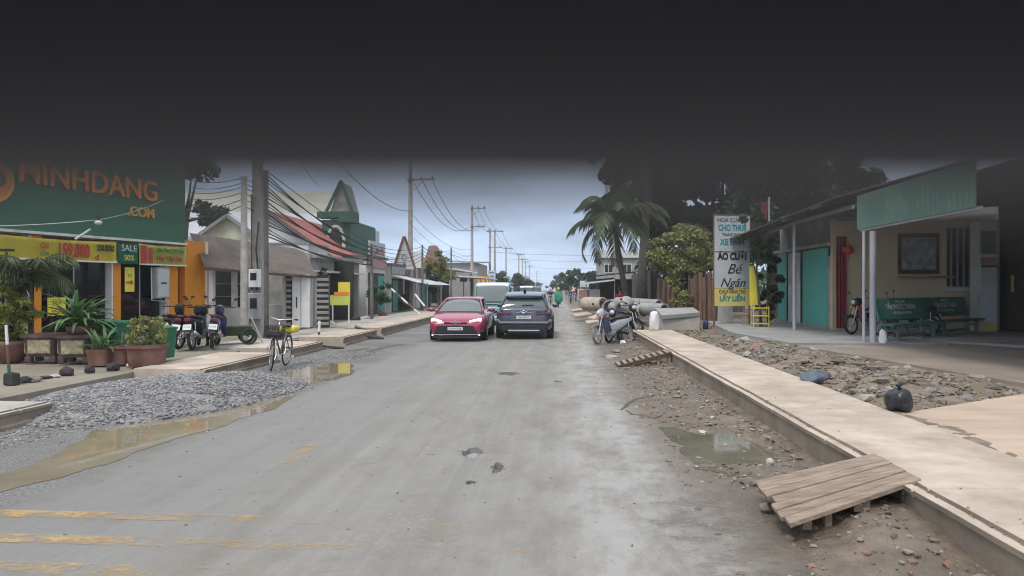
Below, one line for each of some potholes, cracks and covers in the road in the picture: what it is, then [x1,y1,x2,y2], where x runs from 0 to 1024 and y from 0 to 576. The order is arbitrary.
pothole [459,448,484,458]
pothole [489,461,505,474]
